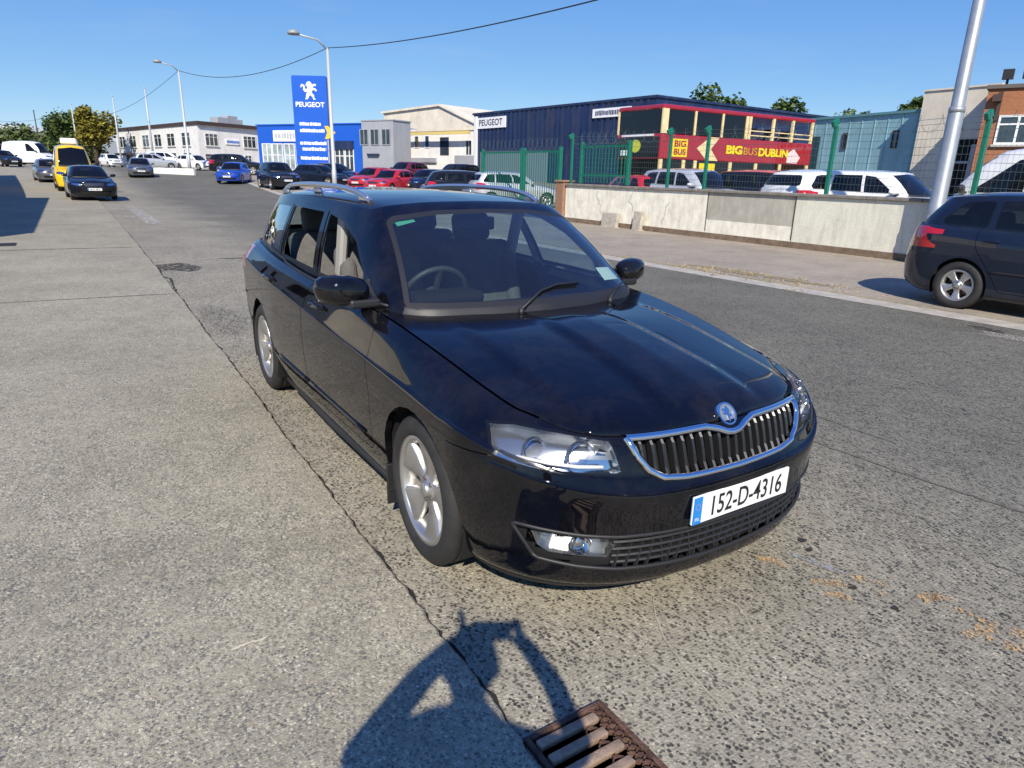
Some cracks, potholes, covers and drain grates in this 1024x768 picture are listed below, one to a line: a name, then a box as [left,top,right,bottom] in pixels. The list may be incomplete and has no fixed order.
drain grate [523,700,668,768]
crack [166,277,508,722]
